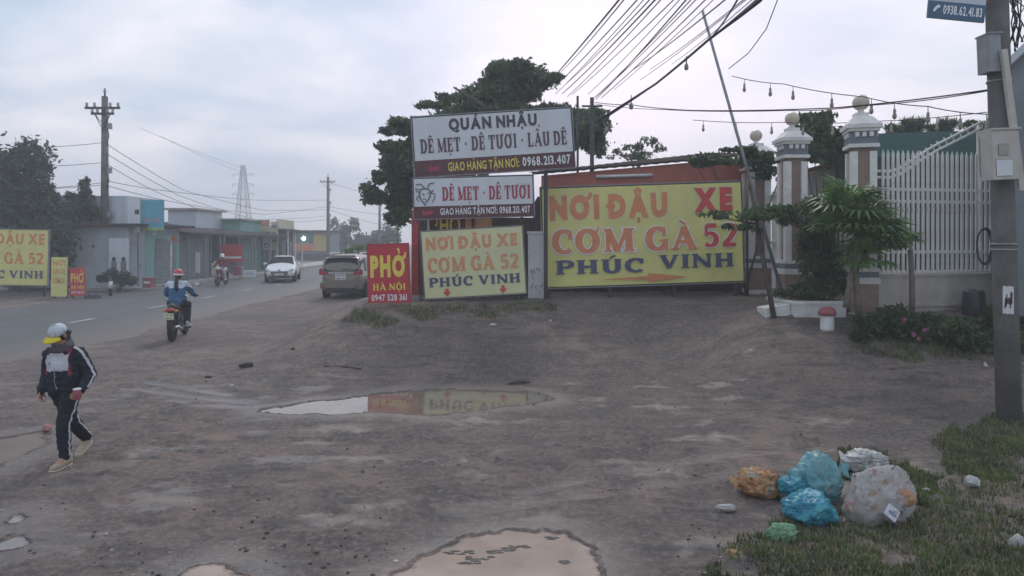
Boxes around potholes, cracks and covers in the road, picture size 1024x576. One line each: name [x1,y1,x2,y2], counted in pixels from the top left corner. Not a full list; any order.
pothole [176,560,254,576]
pothole [388,527,607,576]
pothole [2,513,30,524]
pothole [0,430,52,467]
pothole [0,533,33,552]
pothole [256,388,556,416]
